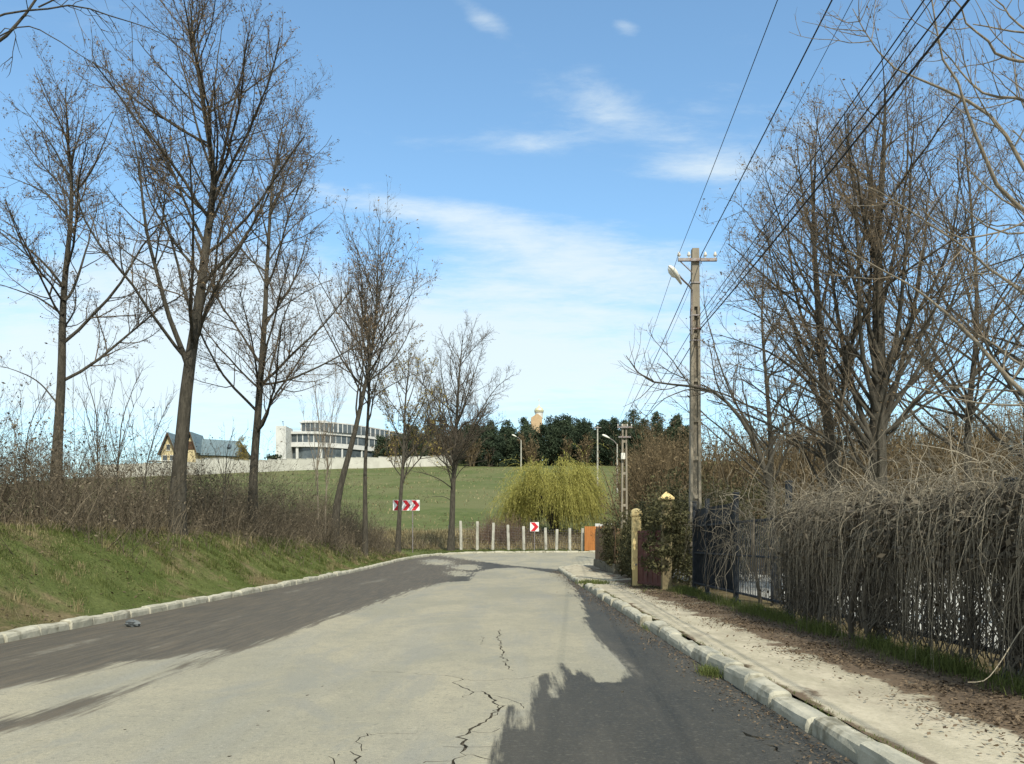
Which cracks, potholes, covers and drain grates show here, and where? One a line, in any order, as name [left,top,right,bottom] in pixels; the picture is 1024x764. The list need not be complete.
crack [328,733,398,764]
crack [372,630,545,764]
